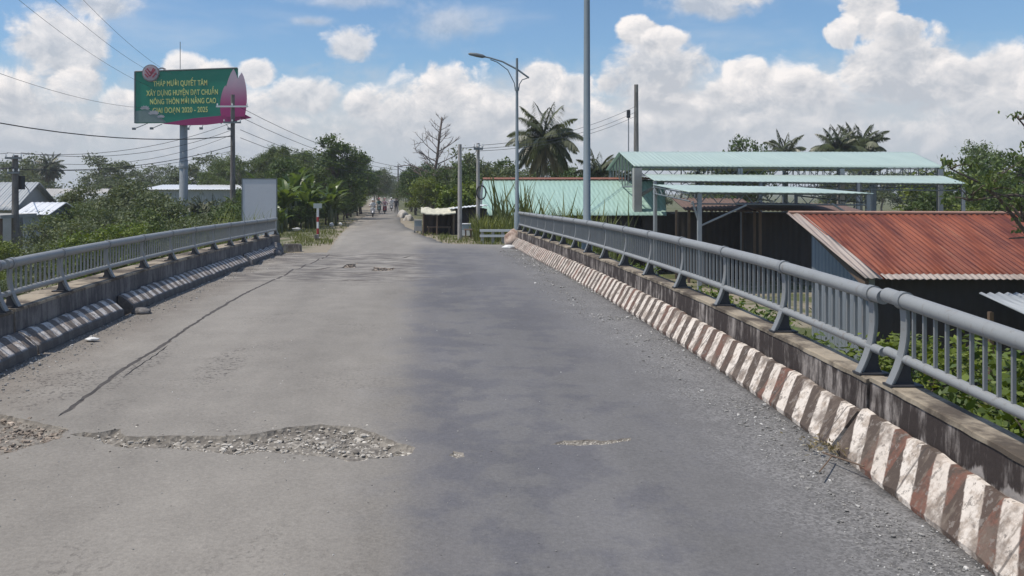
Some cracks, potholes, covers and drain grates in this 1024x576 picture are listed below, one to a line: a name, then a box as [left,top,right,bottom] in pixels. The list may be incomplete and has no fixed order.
crack [59,254,410,416]
pothole [0,414,68,459]
pothole [551,438,631,446]
pothole [67,423,416,462]
